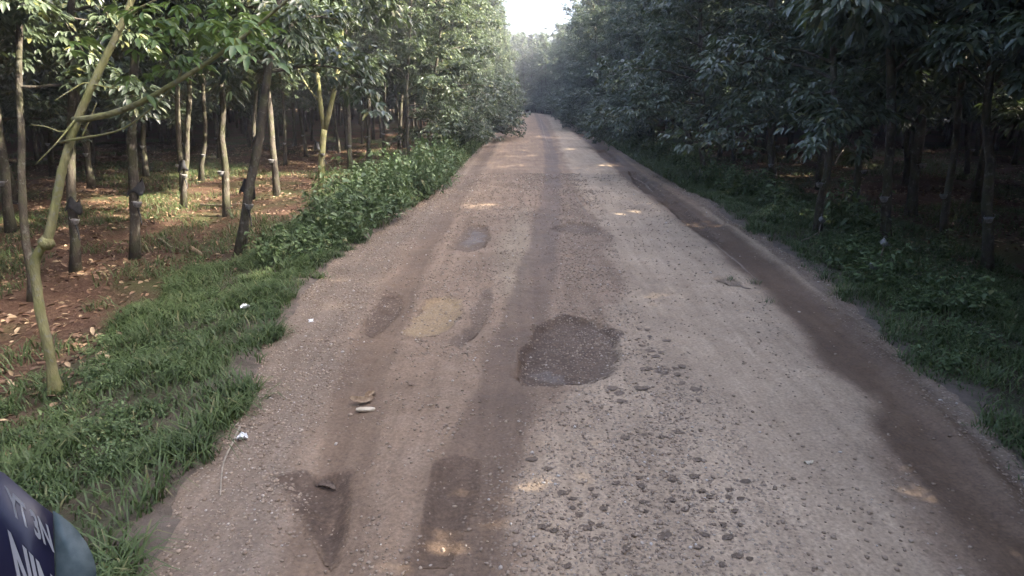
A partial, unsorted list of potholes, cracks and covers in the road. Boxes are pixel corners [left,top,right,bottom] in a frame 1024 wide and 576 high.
pothole [418,455,482,568]
pothole [447,225,491,252]
pothole [363,295,404,337]
pothole [272,467,357,571]
pothole [517,313,625,388]
pothole [446,287,494,348]
